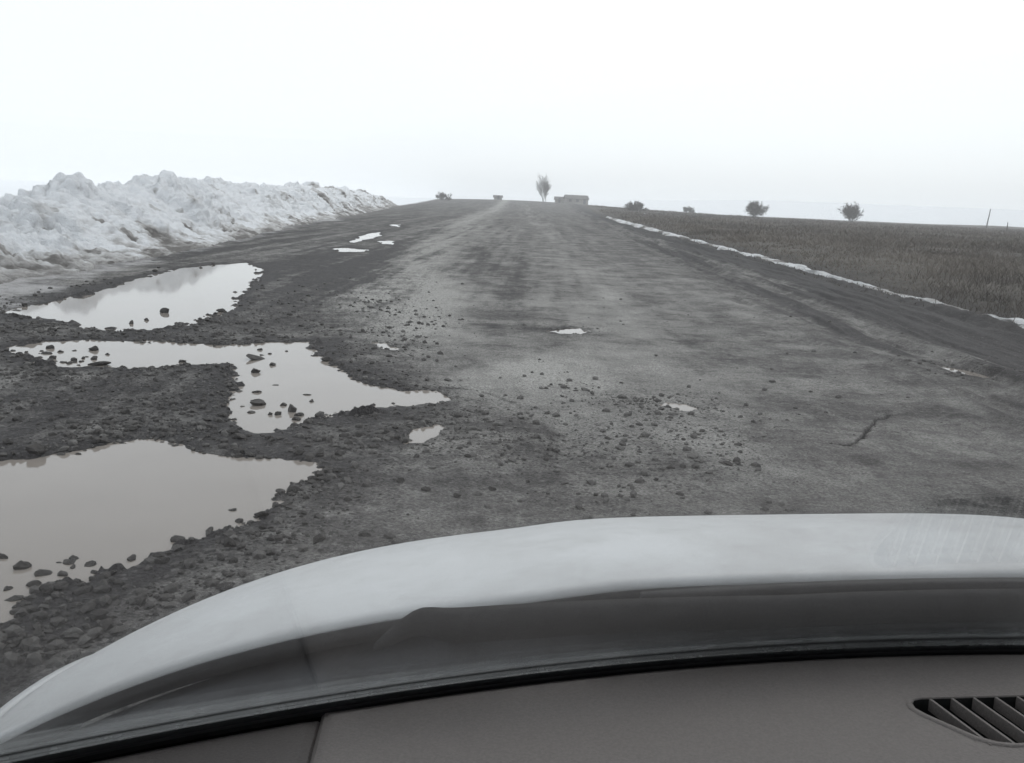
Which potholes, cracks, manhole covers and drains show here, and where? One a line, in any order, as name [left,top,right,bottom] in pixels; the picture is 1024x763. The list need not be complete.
pothole [0,430,340,629]
pothole [394,420,452,445]
pothole [0,261,270,332]
crack [827,413,899,448]
pothole [0,335,458,434]
